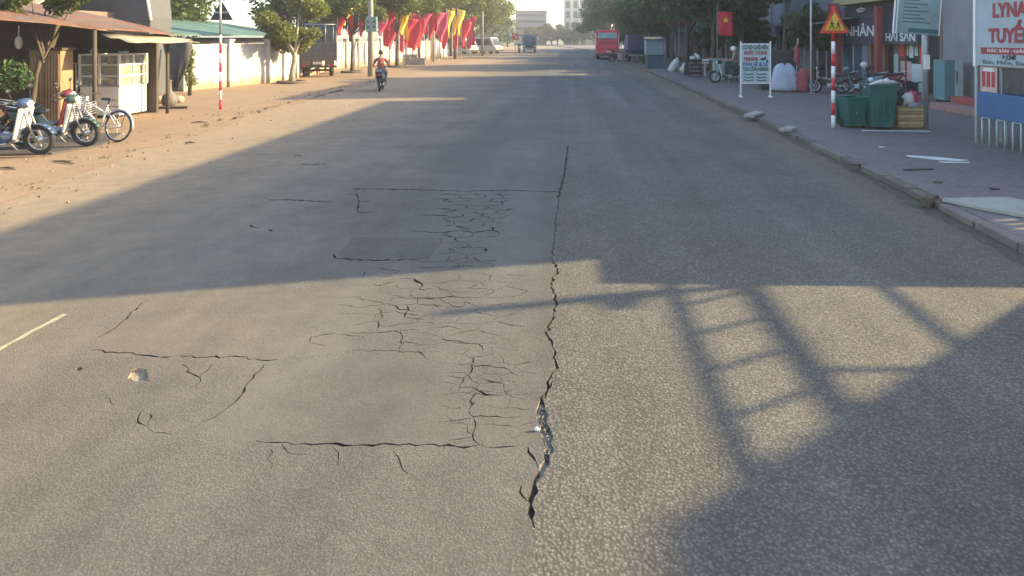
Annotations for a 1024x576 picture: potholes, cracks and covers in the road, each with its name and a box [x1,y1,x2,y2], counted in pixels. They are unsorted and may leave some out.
crack [258,146,569,528]
crack [96,301,277,428]
crack [108,398,169,434]
